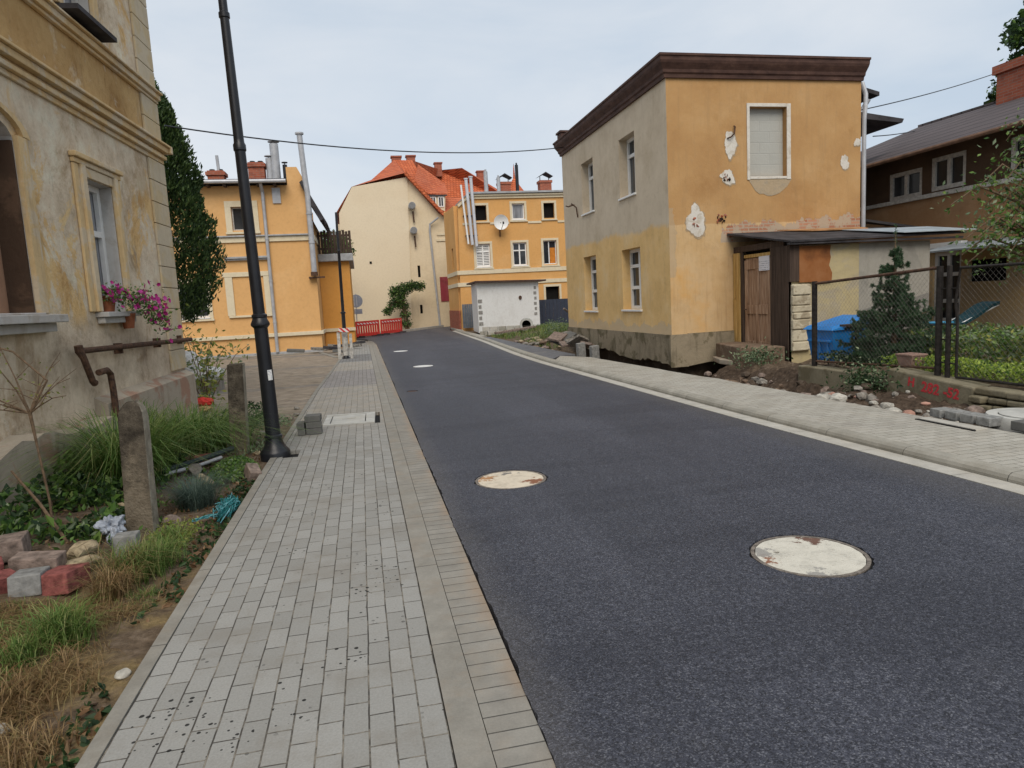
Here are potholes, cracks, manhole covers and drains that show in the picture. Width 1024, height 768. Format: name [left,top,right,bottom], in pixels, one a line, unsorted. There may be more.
manhole cover [323,412,380,426]
manhole cover [983,408,1024,434]
manhole cover [475,470,547,489]
manhole cover [749,535,874,578]
